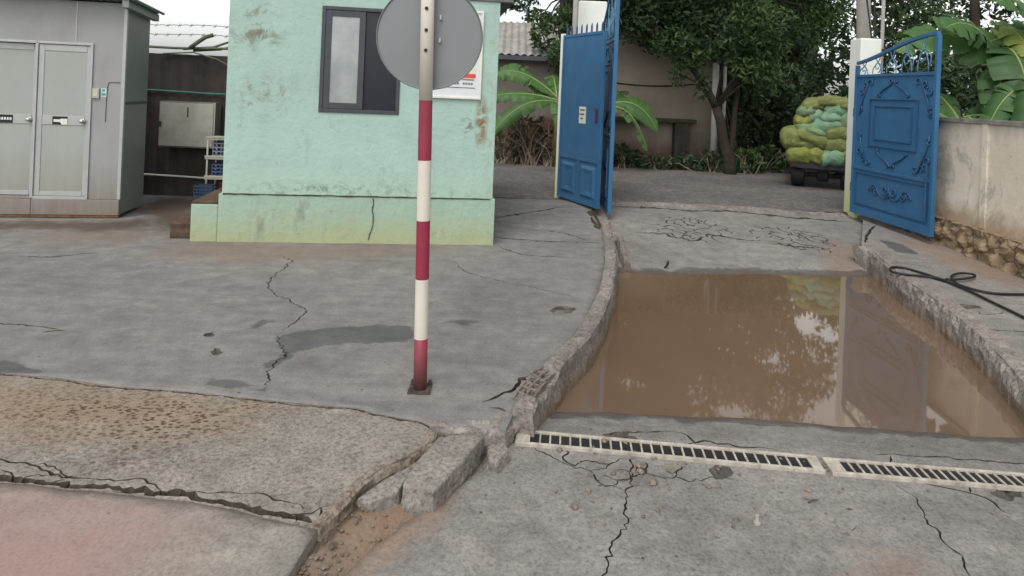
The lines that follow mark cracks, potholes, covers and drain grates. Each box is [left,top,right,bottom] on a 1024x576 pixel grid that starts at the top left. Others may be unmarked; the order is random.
crack [0,323,66,332]
crack [896,483,1006,576]
crack [264,256,307,389]
crack [610,431,777,450]
drain grate [822,457,1024,492]
crack [0,458,329,523]
pothole [549,306,576,315]
pothole [602,431,639,440]
crack [876,454,1024,465]
drain grate [515,430,826,475]
crack [612,206,844,253]
crack [535,449,728,576]
